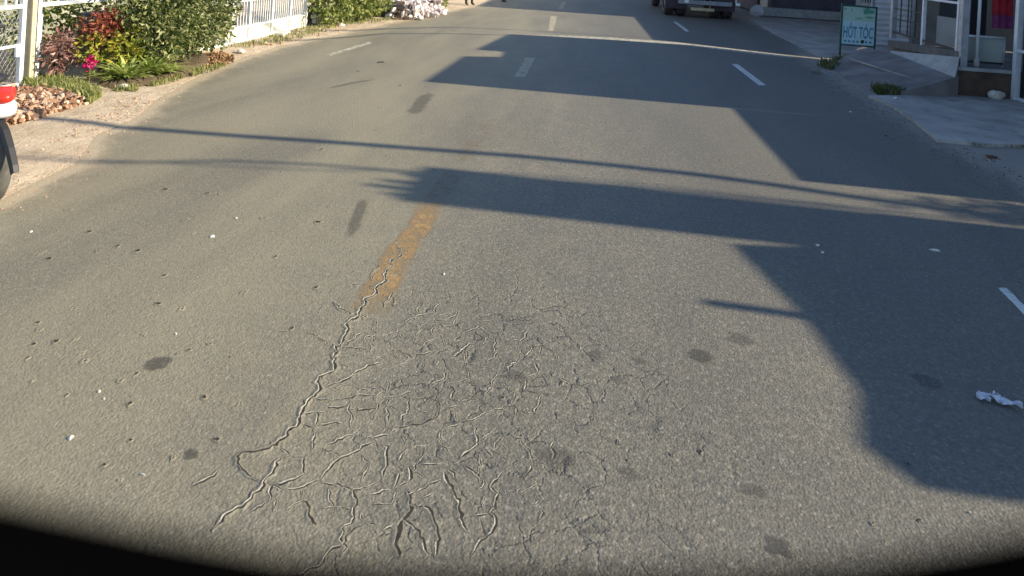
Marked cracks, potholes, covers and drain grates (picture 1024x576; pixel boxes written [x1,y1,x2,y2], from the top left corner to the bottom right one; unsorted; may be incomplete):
crack [190,239,575,559]
